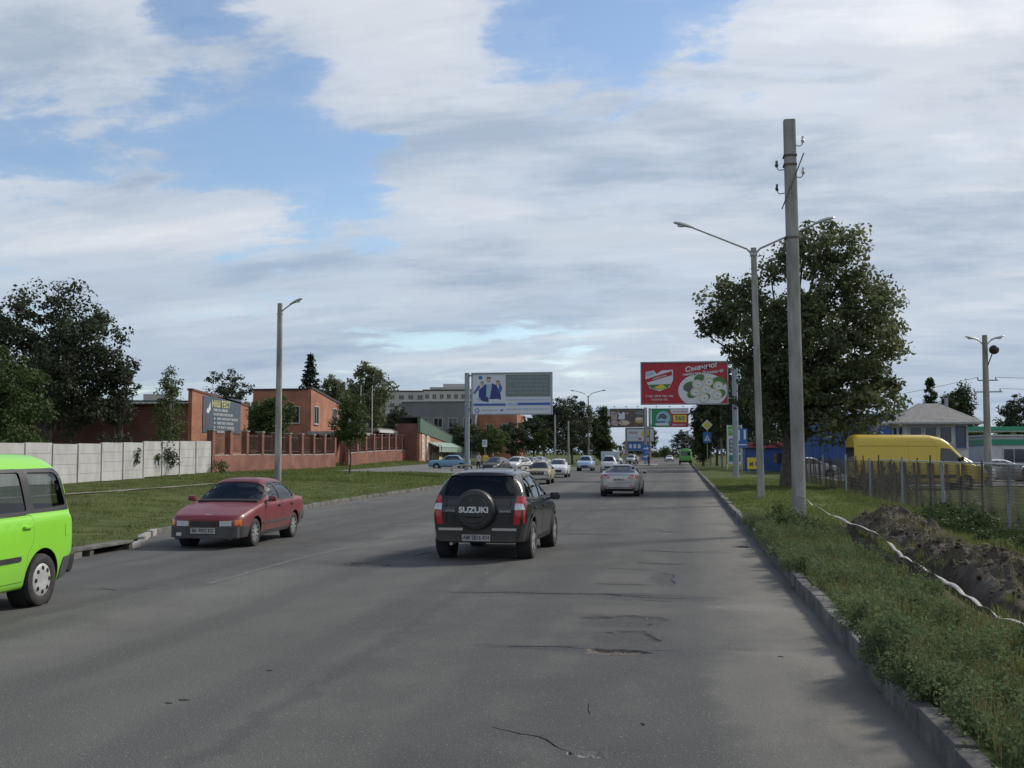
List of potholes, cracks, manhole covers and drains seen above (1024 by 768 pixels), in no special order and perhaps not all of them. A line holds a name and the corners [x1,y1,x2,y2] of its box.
pothole [585,648,653,656]
crack [493,727,572,755]
